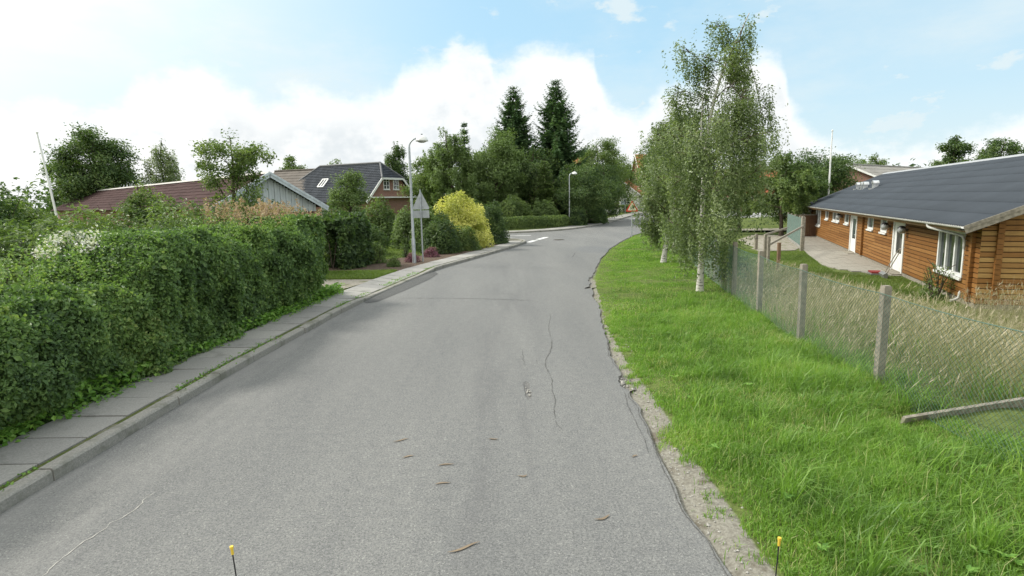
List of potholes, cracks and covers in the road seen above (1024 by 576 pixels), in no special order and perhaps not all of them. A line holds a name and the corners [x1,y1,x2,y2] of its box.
crack [520,316,563,431]
pothole [523,382,532,400]
crack [44,493,153,575]
